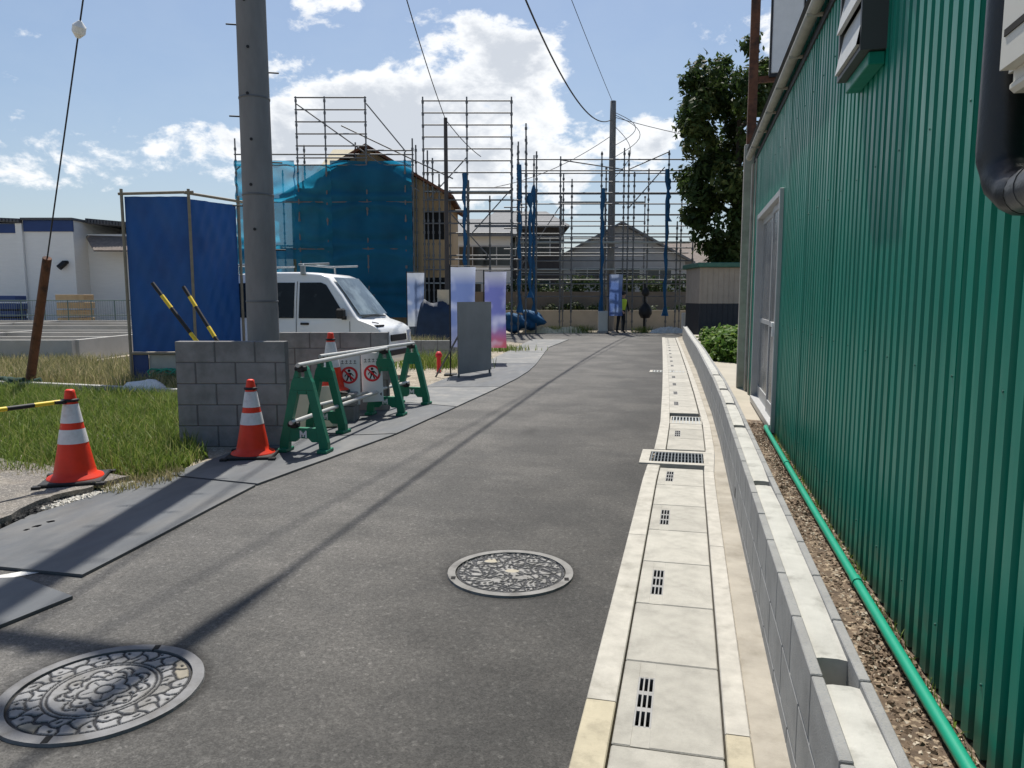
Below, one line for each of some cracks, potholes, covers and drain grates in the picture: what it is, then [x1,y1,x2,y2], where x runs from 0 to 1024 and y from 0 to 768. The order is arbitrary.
drain grate [670,416,703,429]
drain grate [639,449,714,474]
manhole cover [447,550,574,599]
manhole cover [0,644,205,748]
